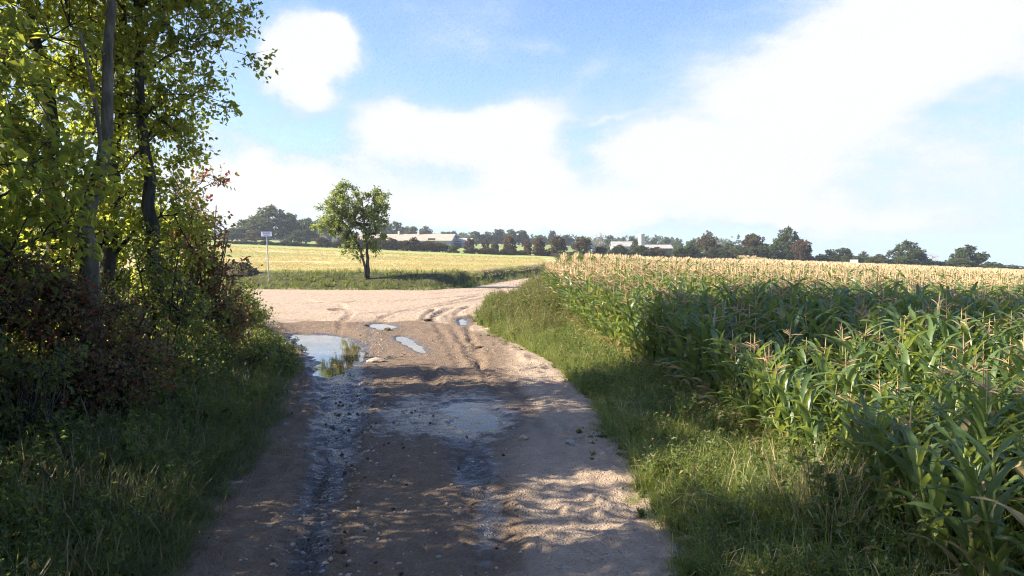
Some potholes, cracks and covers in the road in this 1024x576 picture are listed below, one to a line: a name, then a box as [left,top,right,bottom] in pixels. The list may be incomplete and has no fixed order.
pothole [364,322,403,330]
pothole [455,316,471,326]
pothole [390,335,432,354]
pothole [282,332,373,382]
pothole [432,396,516,435]
